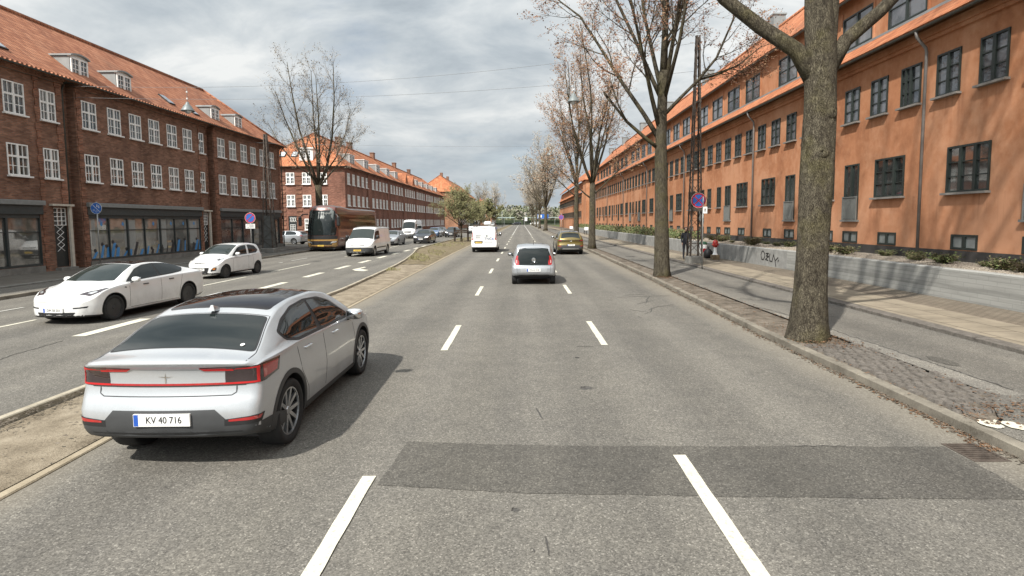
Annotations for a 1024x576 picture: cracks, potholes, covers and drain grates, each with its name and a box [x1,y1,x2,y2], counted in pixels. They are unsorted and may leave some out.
drain grate [941,443,1012,462]
